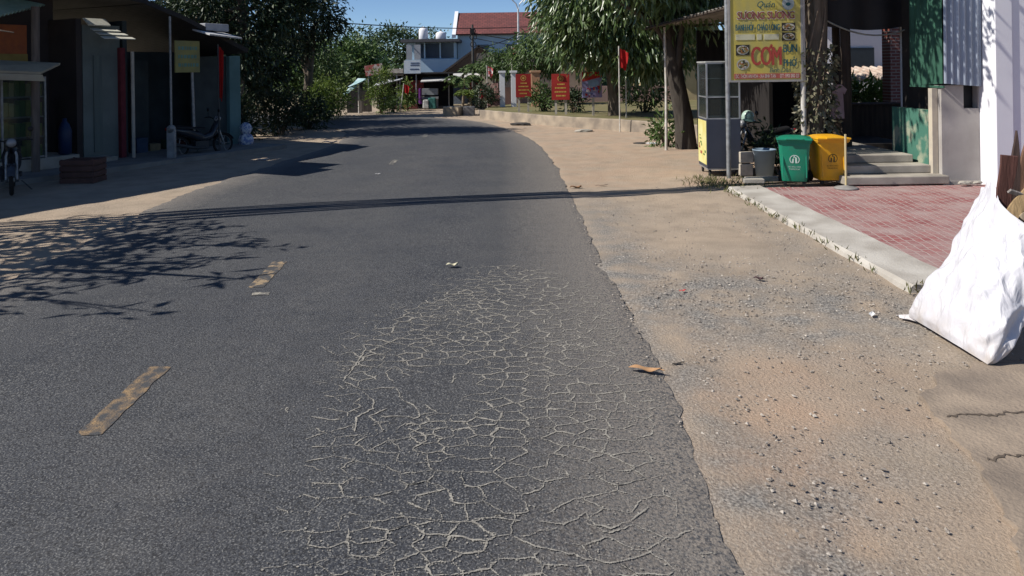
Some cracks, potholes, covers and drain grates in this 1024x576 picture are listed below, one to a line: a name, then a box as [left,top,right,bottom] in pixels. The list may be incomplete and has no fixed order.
crack [987,453,1024,462]
crack [261,265,715,576]
